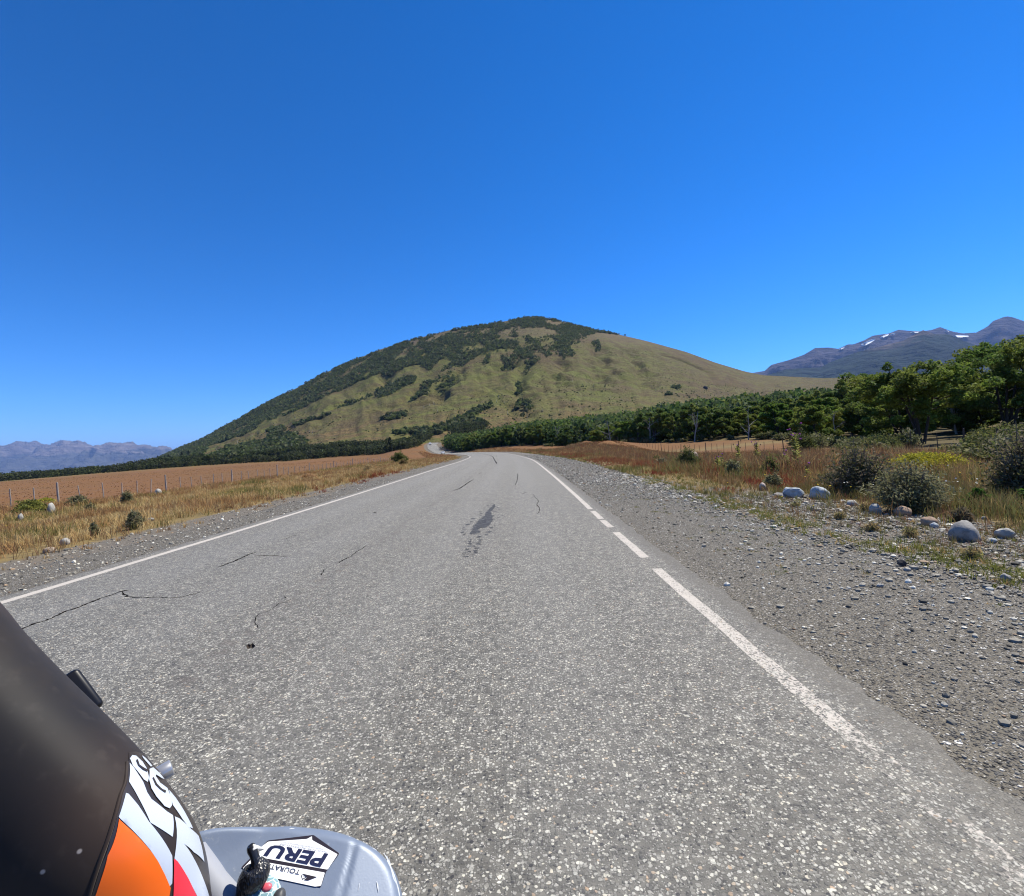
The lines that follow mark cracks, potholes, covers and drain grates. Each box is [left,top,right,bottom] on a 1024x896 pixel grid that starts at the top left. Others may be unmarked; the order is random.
crack [22,590,199,629]
